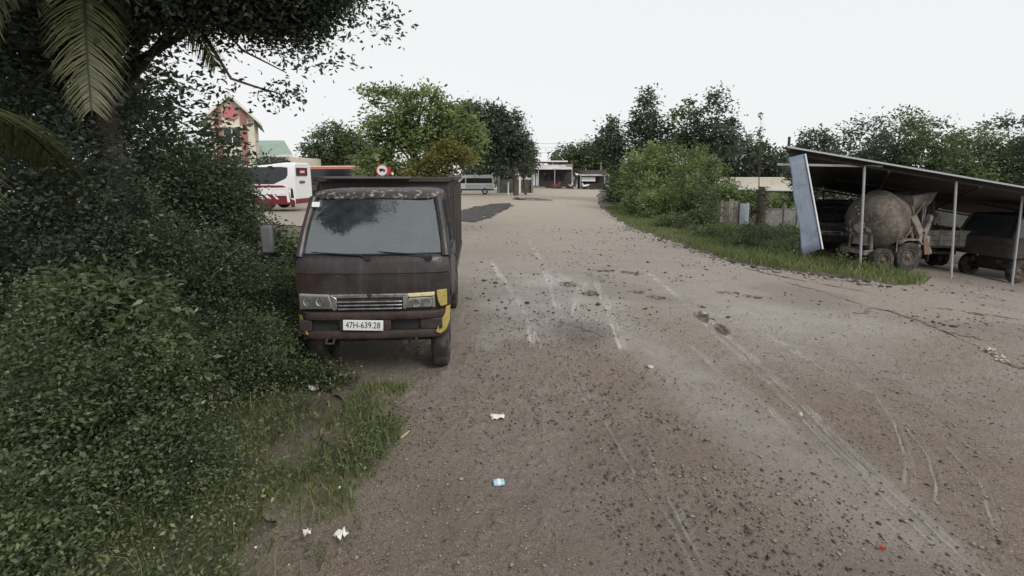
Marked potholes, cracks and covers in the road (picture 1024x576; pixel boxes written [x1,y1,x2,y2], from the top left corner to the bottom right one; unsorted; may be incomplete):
crack [745,268,1024,368]
